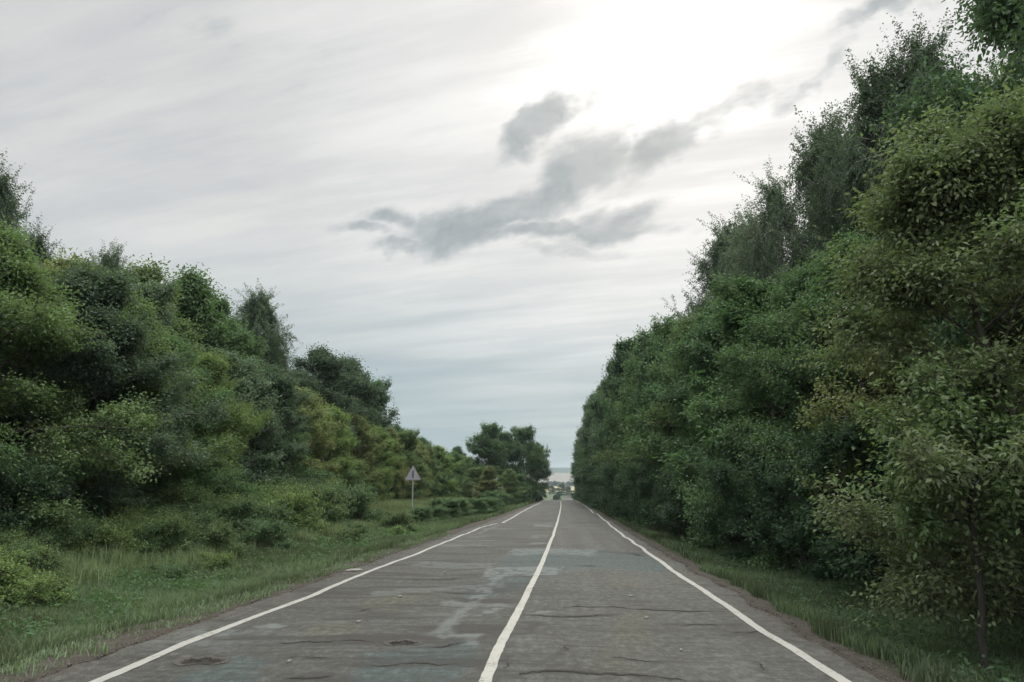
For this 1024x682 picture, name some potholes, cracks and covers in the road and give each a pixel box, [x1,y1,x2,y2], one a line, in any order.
pothole [172,655,229,666]
crack [501,657,704,682]
crack [532,606,761,633]
